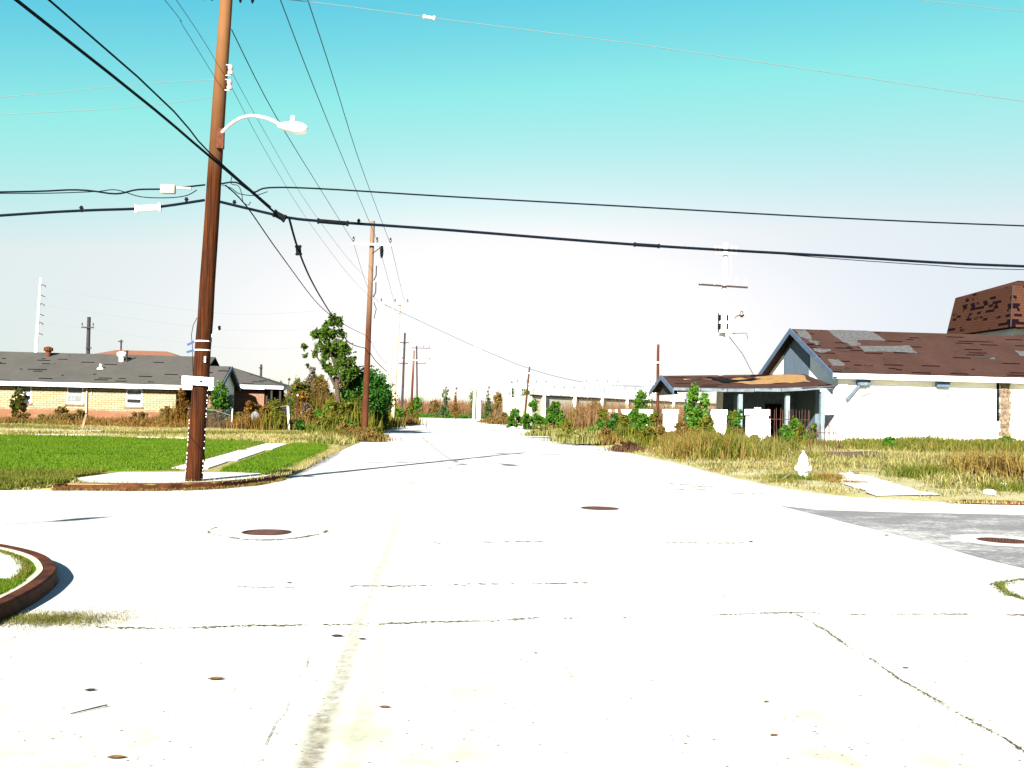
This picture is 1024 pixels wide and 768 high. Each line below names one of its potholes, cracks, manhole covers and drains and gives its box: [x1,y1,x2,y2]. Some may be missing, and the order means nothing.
crack [794,613,1023,750]
manhole cover [950,534,1024,547]
